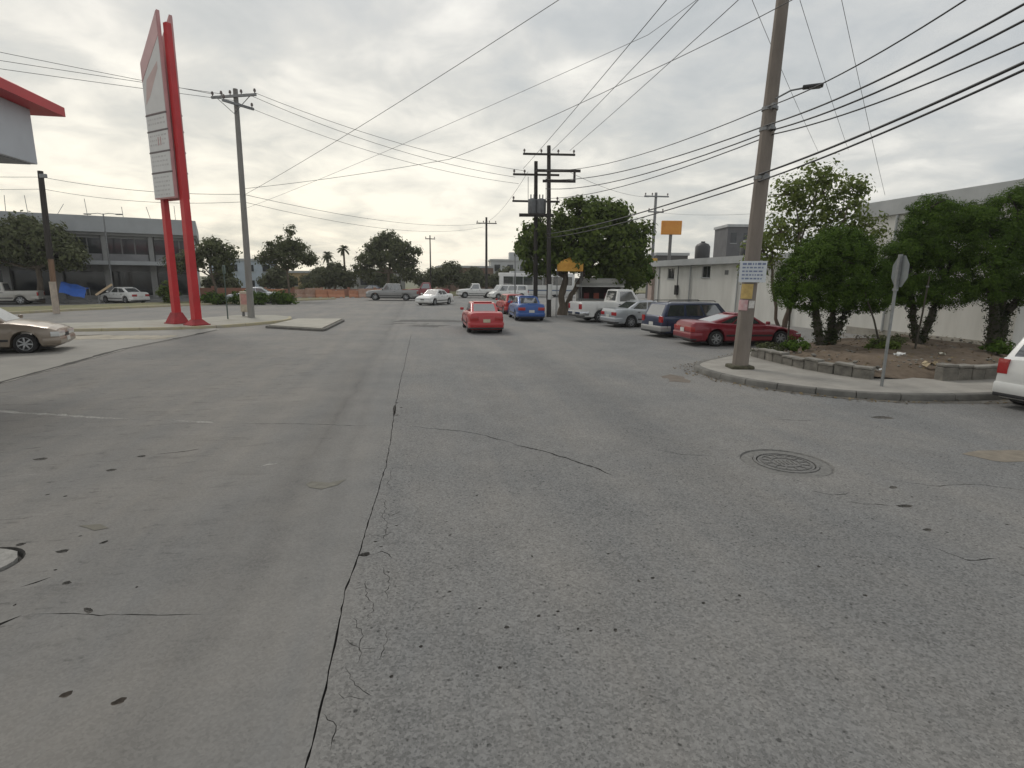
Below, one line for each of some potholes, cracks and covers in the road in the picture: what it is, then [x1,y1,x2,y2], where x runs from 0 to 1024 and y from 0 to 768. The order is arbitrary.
manhole cover [0,547,26,572]
crack [324,472,394,745]
manhole cover [740,449,835,478]
